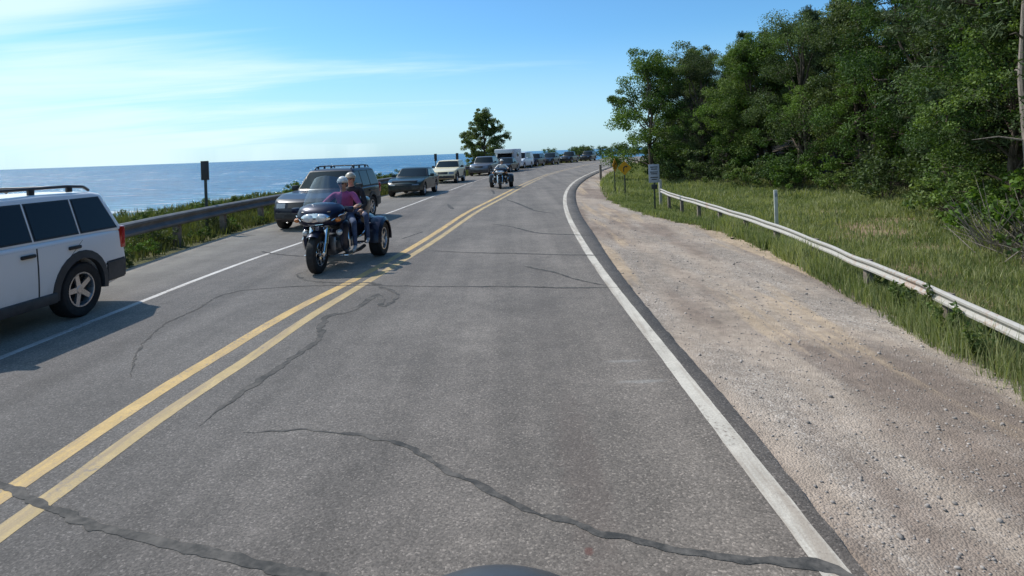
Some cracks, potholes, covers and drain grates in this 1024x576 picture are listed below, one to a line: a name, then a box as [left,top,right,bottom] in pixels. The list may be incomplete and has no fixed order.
crack [491,190,575,235]
crack [130,251,605,376]
